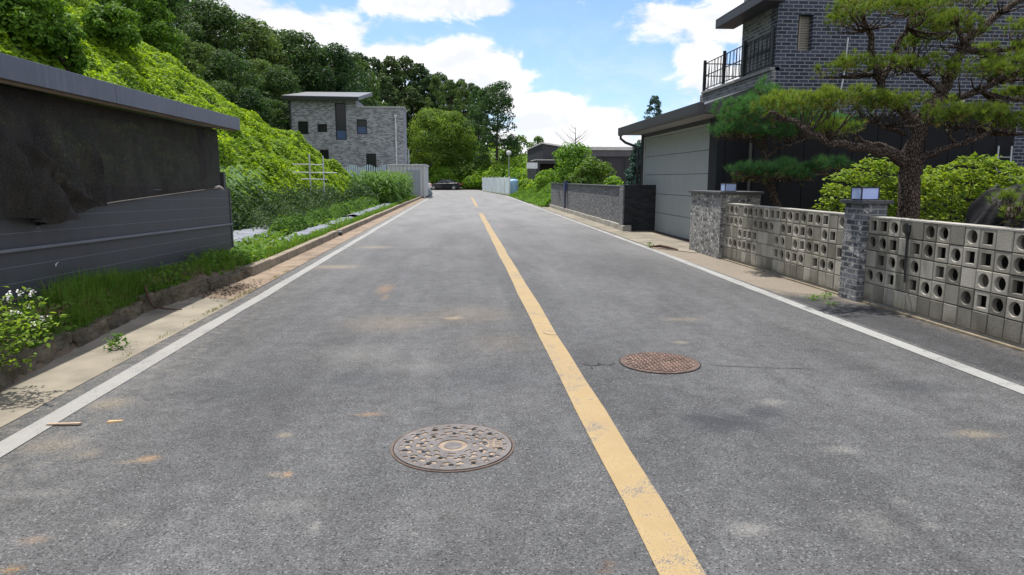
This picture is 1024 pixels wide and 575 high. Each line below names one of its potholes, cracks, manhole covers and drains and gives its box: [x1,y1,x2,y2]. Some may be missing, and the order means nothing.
manhole cover [391,424,514,473]
manhole cover [619,352,701,374]
